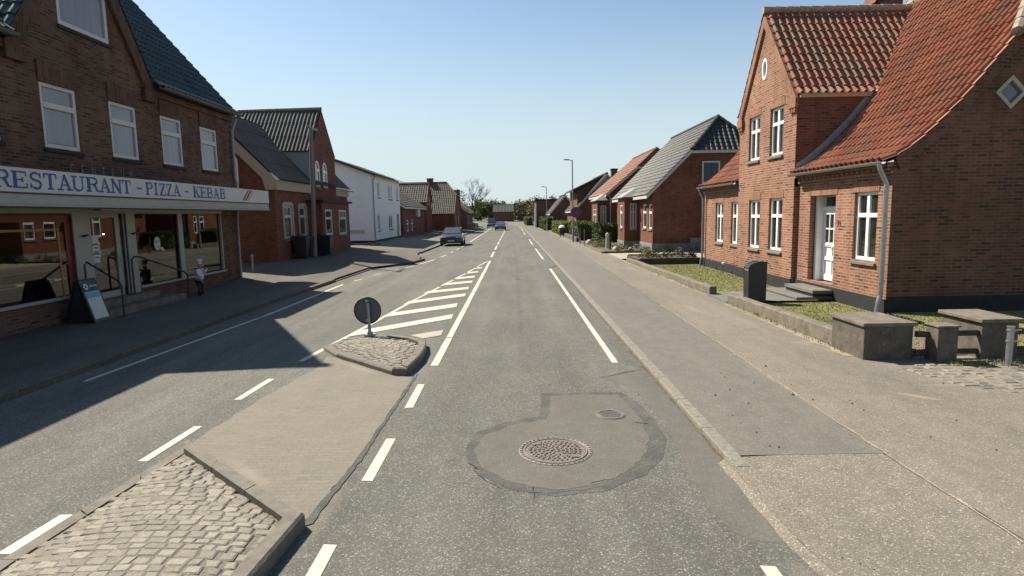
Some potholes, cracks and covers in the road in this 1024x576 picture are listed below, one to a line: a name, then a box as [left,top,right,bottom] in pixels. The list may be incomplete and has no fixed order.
manhole cover [596,409,626,420]
manhole cover [519,436,592,466]
